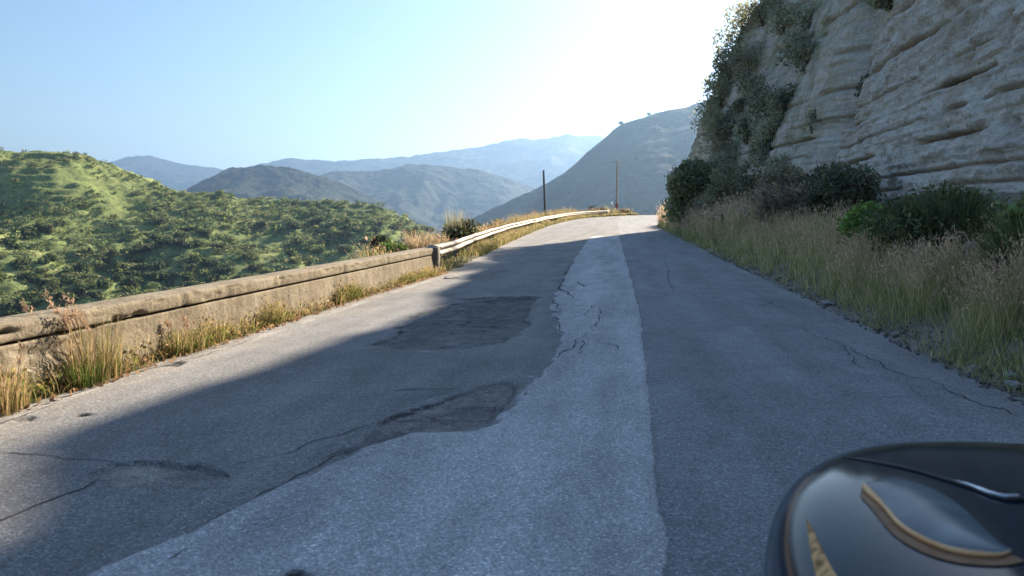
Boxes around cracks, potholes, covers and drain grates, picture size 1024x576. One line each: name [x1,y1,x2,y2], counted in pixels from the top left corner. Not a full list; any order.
crack [552,261,619,356]
crack [197,424,369,527]
crack [804,328,1015,416]
crack [0,452,115,520]
